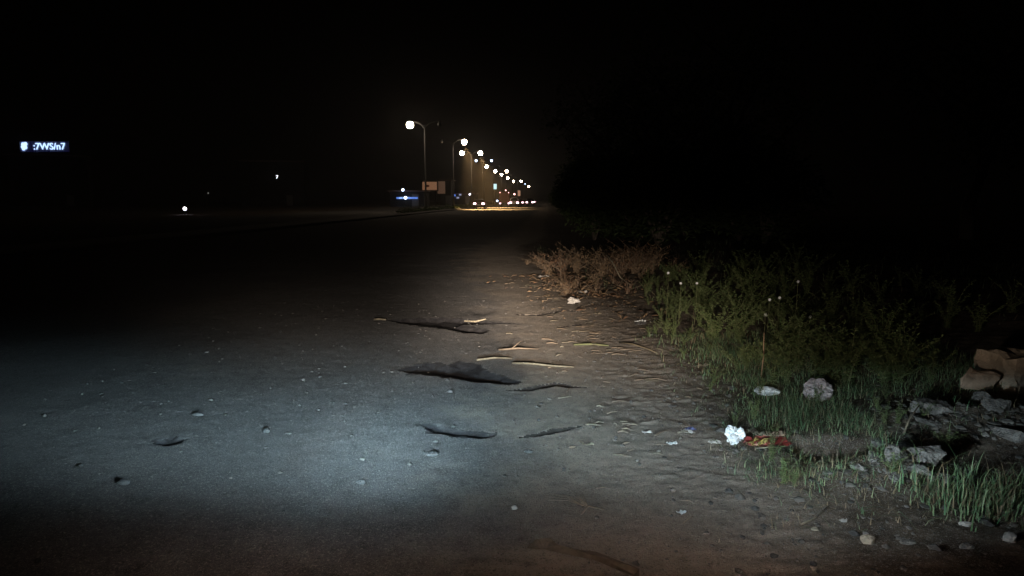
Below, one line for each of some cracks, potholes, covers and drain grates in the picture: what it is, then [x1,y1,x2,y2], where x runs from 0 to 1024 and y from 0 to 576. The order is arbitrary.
pothole [151,436,188,446]
pothole [395,361,523,386]
crack [519,426,582,438]
crack [506,382,587,391]
pothole [414,423,497,439]
pothole [385,317,516,334]
